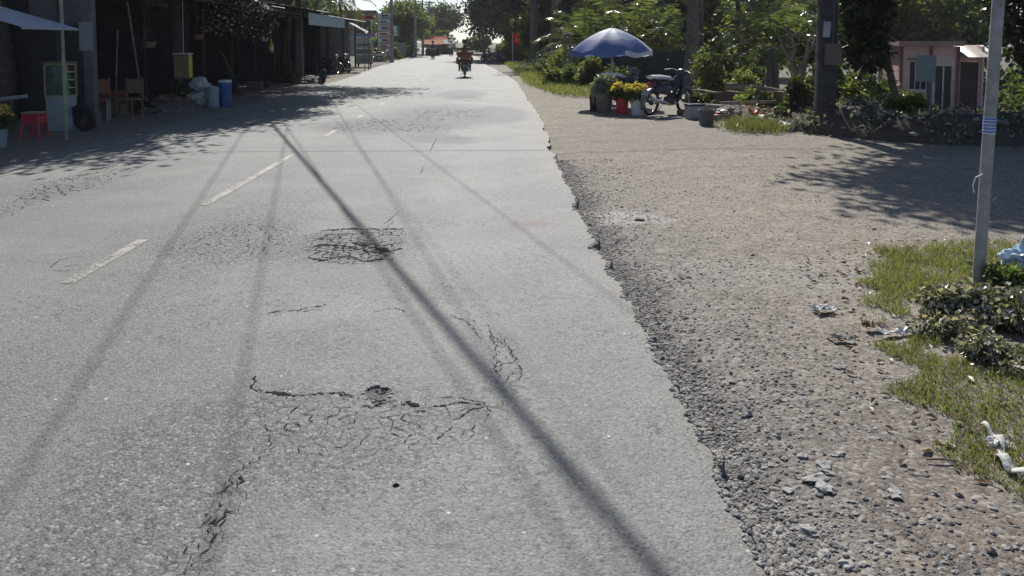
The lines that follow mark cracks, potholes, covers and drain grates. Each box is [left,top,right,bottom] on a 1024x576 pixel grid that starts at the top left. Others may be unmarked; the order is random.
crack [301,215,406,264]
crack [451,316,526,386]
pothole [362,384,394,402]
crack [149,219,303,265]
crack [161,375,508,575]
crack [3,157,179,215]
crack [333,96,491,149]
